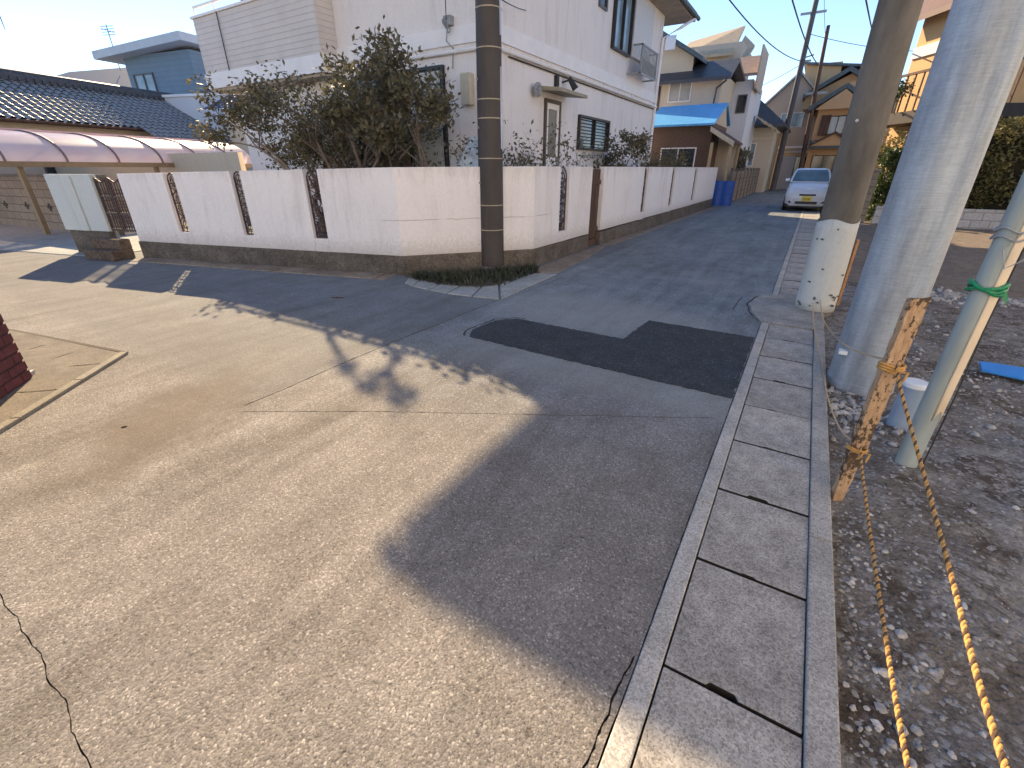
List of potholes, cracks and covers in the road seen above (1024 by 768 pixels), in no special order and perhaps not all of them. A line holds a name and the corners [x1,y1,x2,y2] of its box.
crack [0,593,92,768]
crack [582,656,635,768]
